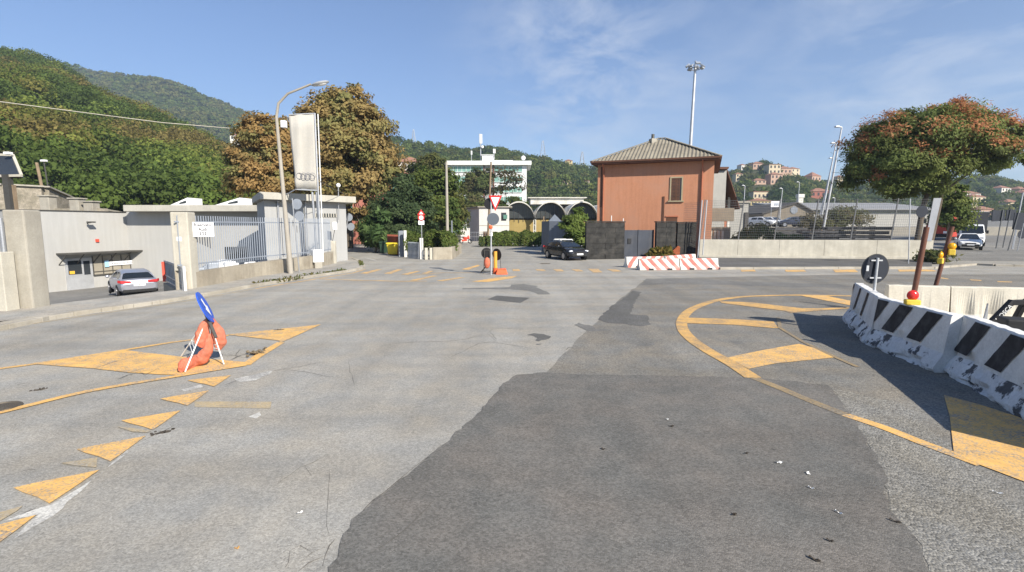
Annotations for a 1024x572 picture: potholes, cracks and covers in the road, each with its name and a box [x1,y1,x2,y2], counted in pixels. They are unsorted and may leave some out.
crack [275,458,332,571]
